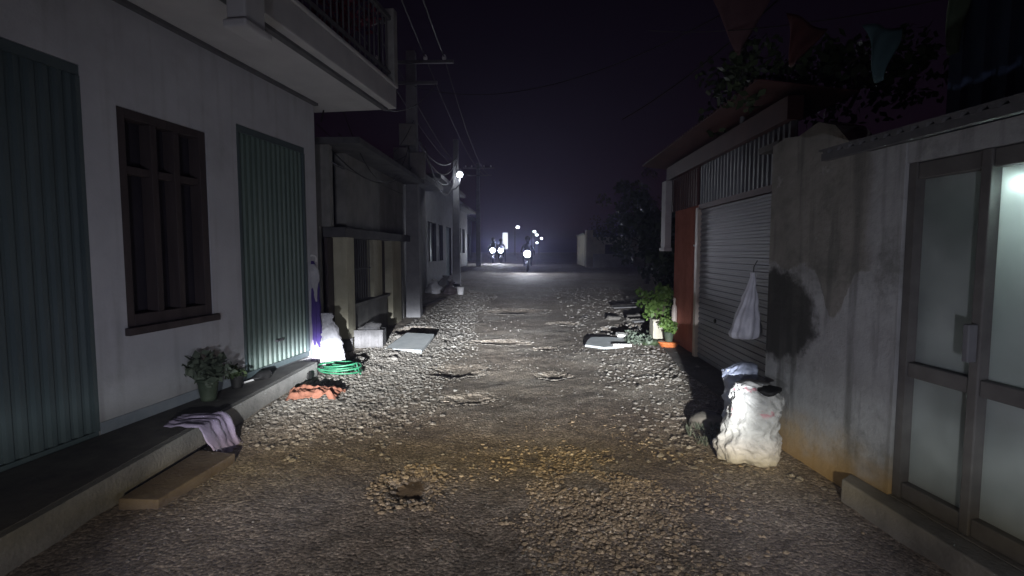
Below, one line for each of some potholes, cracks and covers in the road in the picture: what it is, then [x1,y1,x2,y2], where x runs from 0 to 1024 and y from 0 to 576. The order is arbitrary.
pothole [534,371,573,381]
pothole [424,364,489,380]
pothole [440,393,497,406]
pothole [378,467,440,507]
